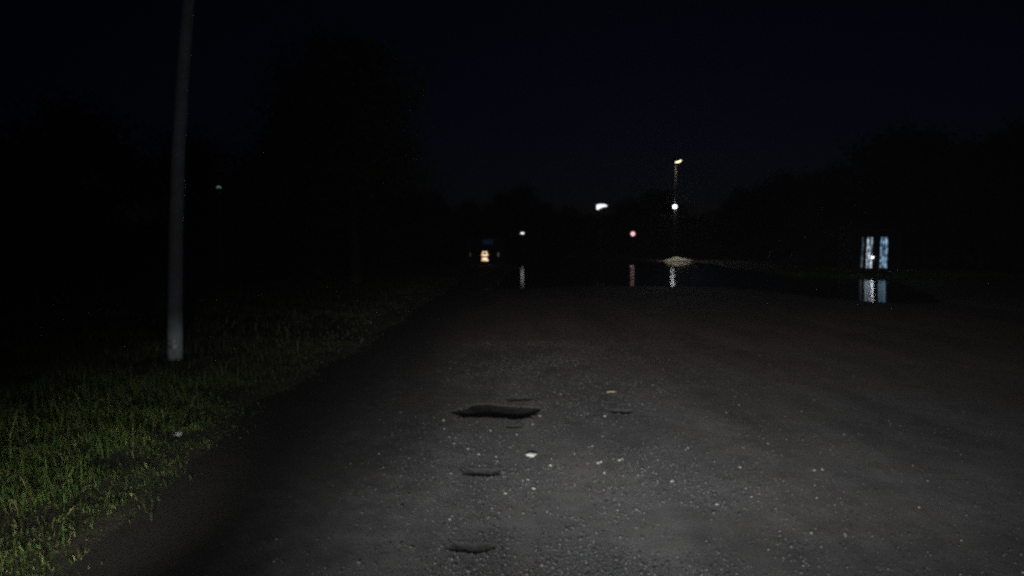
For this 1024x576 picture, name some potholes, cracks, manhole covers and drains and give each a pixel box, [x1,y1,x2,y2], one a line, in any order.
pothole [449,402,542,420]
pothole [443,541,500,554]
pothole [459,467,505,477]
